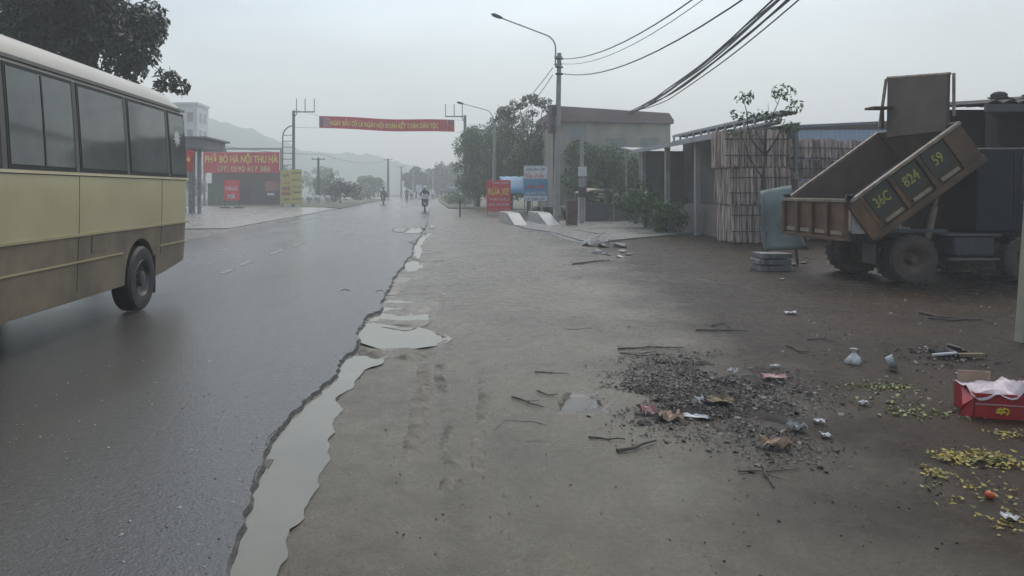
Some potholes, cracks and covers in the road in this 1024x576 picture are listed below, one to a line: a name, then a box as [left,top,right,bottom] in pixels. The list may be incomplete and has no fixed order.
pothole [230,356,387,576]
crack [358,319,432,356]
pothole [541,392,611,416]
pothole [358,324,452,350]
